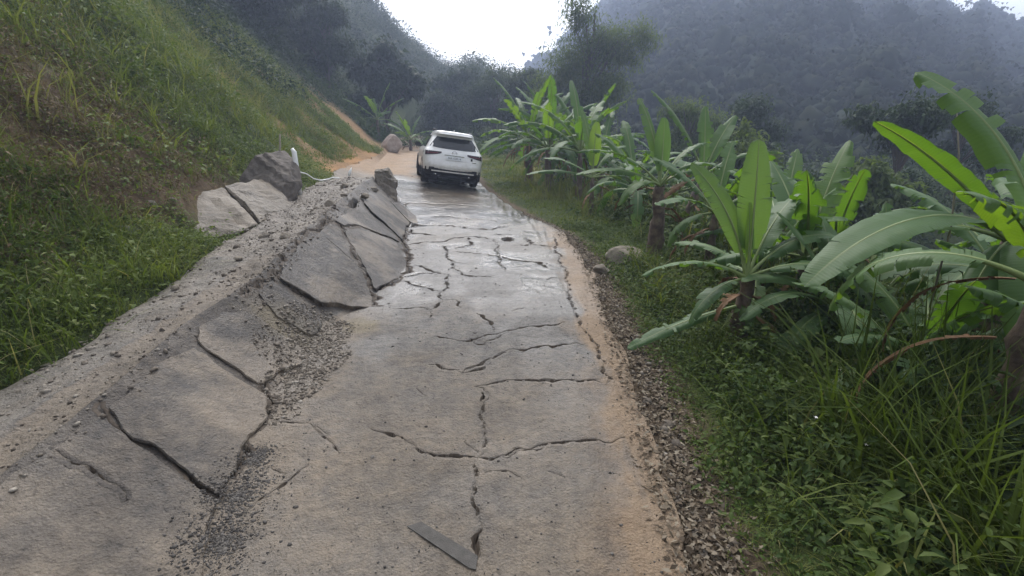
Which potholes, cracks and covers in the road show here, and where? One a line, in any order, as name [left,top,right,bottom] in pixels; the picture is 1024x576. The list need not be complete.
crack [324,215,627,576]
crack [43,339,343,513]
